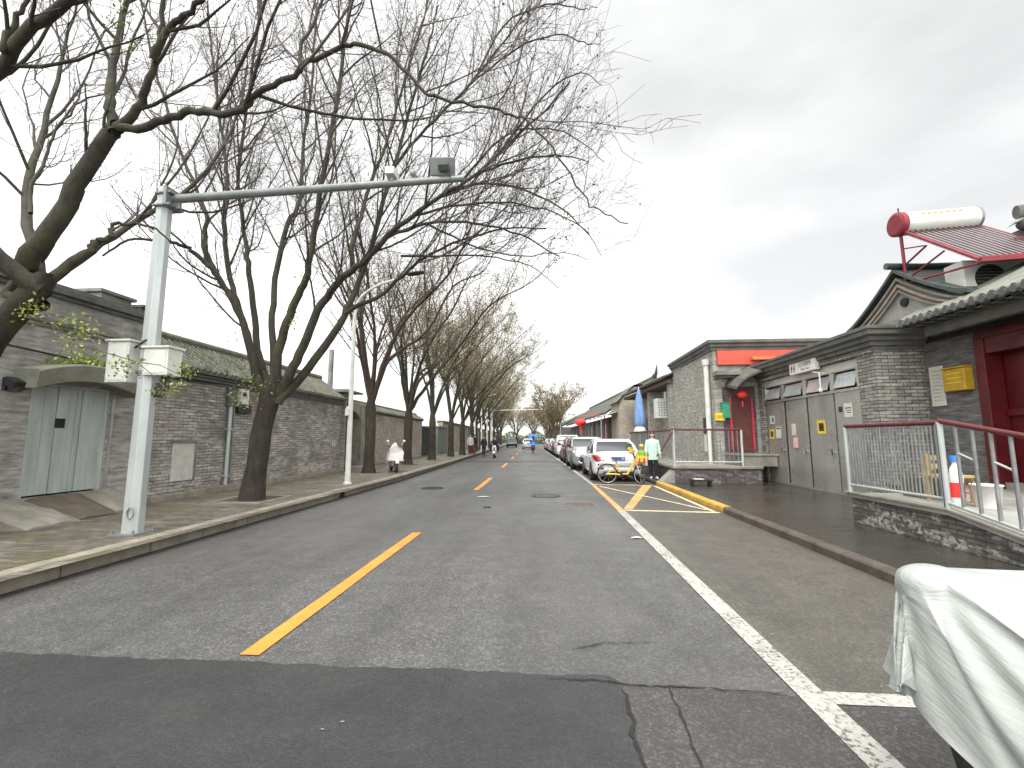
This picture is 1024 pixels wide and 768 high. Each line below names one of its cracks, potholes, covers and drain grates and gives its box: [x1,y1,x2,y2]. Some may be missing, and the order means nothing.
crack [547,677,788,768]
crack [573,641,656,649]
